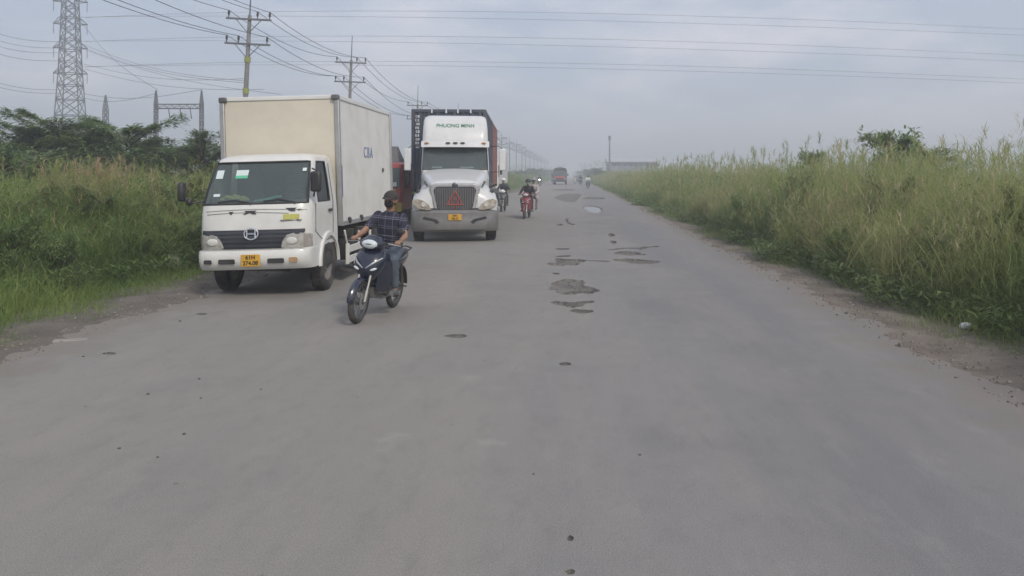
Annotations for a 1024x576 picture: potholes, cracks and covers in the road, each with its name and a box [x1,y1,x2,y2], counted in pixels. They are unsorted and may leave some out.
pothole [549,278,600,295]
pothole [550,300,594,308]
pothole [548,258,586,266]
pothole [555,194,581,202]
